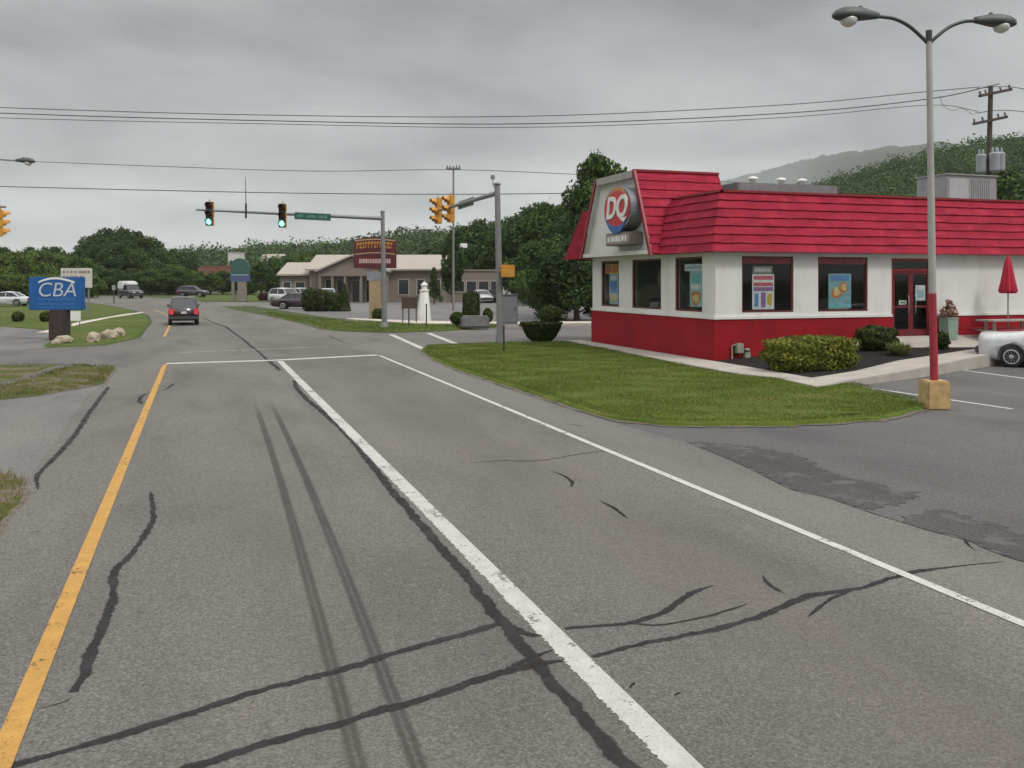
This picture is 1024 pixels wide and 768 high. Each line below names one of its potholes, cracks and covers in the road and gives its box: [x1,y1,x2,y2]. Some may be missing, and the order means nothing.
crack [474,450,616,487]
crack [601,501,628,519]
crack [138,383,174,404]
